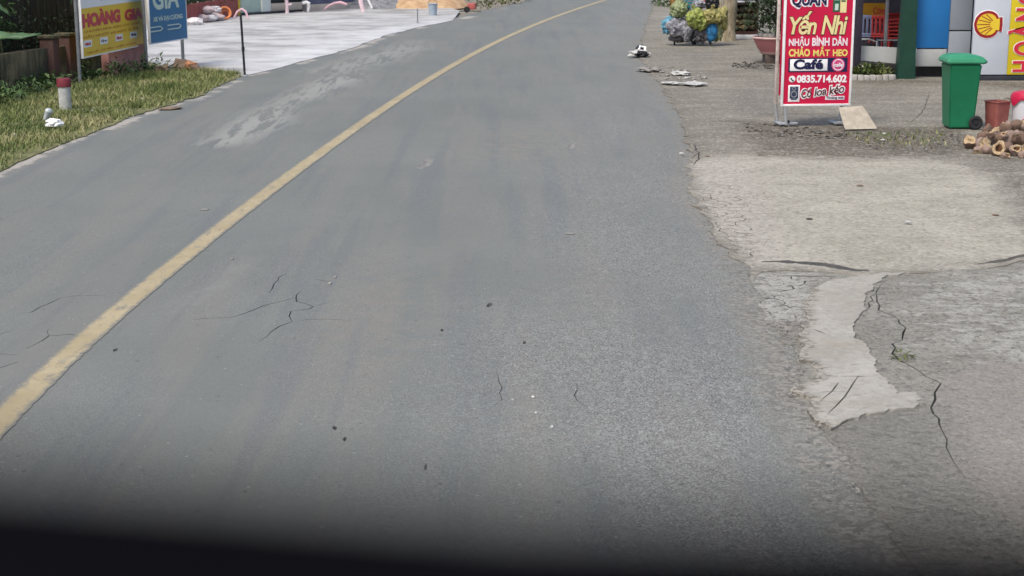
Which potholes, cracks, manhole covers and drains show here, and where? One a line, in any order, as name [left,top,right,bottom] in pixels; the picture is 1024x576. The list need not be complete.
crack [195,274,337,342]
crack [1,295,92,368]
crack [978,254,1024,264]
crack [702,171,966,478]
